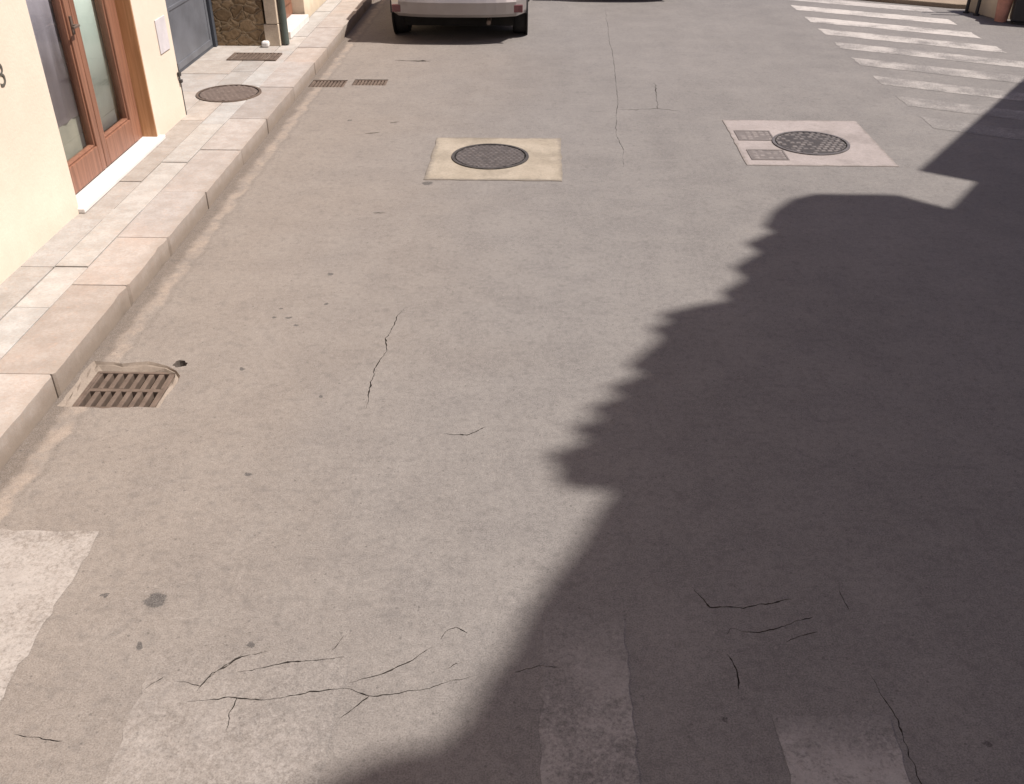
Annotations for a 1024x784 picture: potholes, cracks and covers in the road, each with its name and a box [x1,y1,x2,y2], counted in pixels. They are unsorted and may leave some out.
crack [727,617,815,642]
drain grate [226,52,282,62]
crack [871,676,922,784]
crack [366,309,404,407]
manhole cover [772,131,850,156]
manhole cover [196,84,262,103]
manhole cover [451,143,529,170]
drain grate [57,361,180,408]
crack [187,627,469,727]
crack [693,588,788,609]
